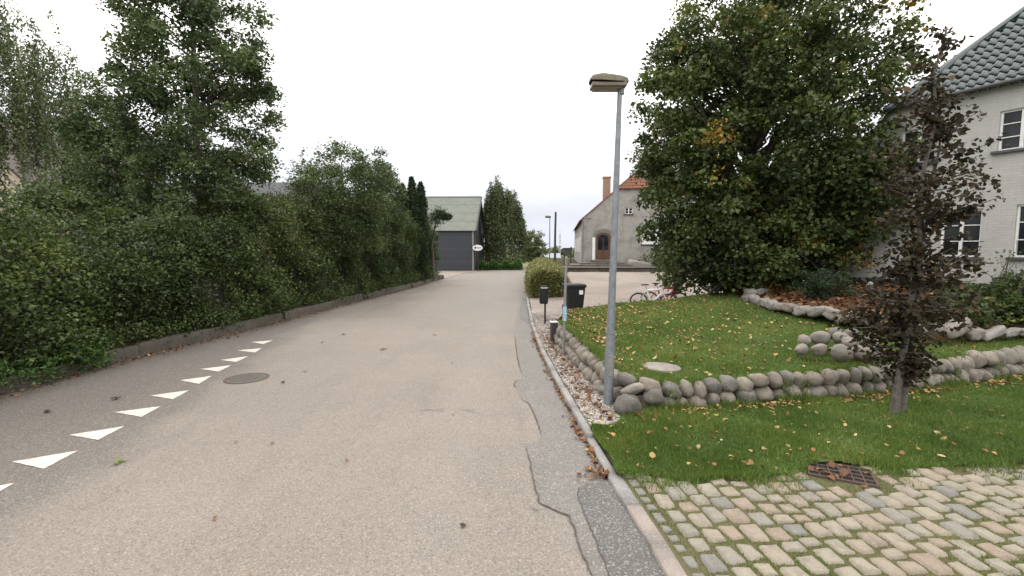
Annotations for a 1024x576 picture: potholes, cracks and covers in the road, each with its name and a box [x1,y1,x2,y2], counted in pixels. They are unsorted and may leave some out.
manhole cover [223,373,270,384]
crack [514,380,594,576]
drain grate [806,462,880,489]
